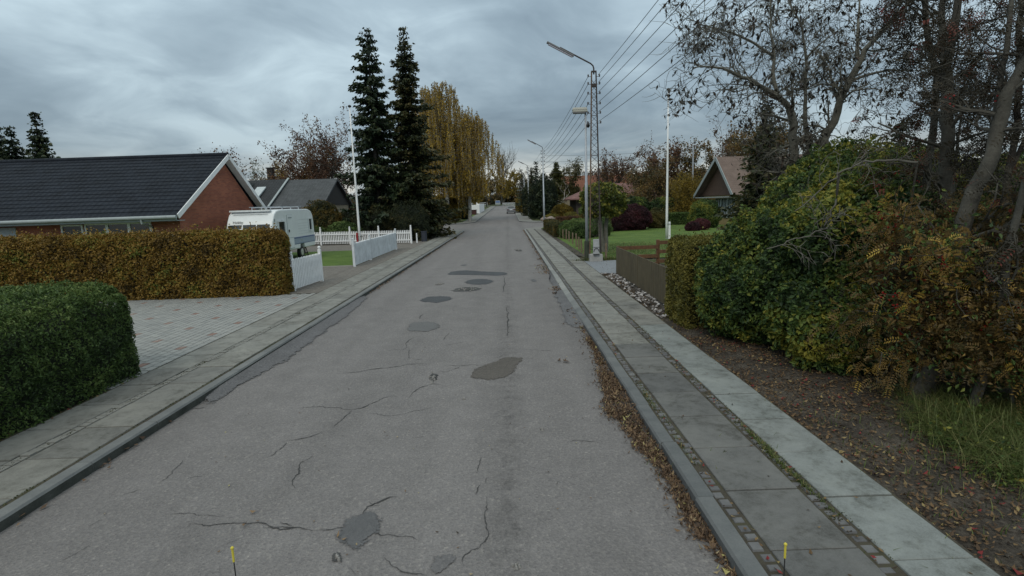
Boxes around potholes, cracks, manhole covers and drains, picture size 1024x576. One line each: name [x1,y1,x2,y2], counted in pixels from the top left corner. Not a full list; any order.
crack [462,459,489,565]
crack [173,513,343,542]
crack [274,364,473,490]
